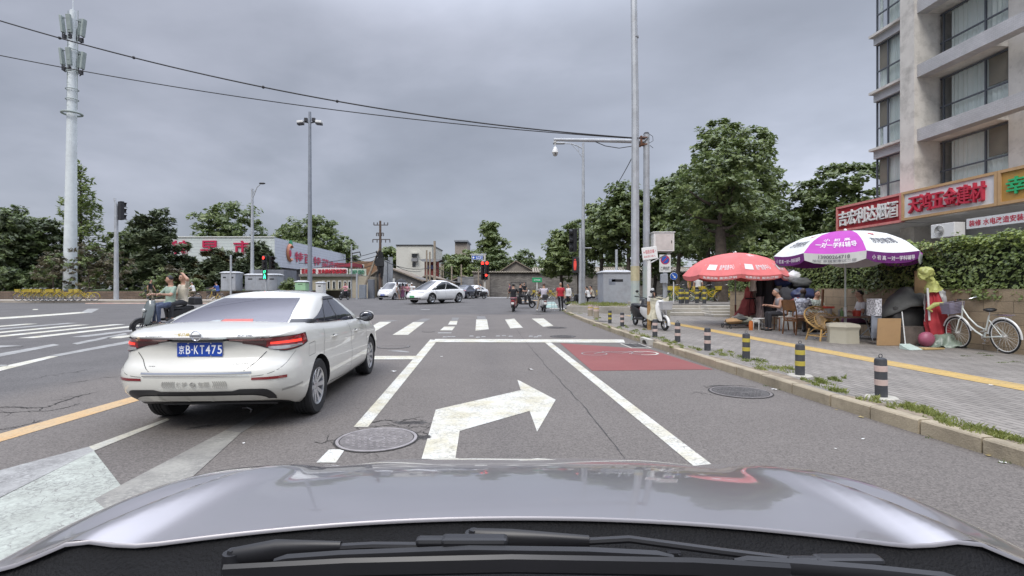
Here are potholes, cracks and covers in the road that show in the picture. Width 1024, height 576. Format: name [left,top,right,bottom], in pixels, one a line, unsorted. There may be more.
manhole cover [708,386,774,399]
crack [0,369,119,429]
crack [317,417,430,443]
manhole cover [333,427,419,453]
